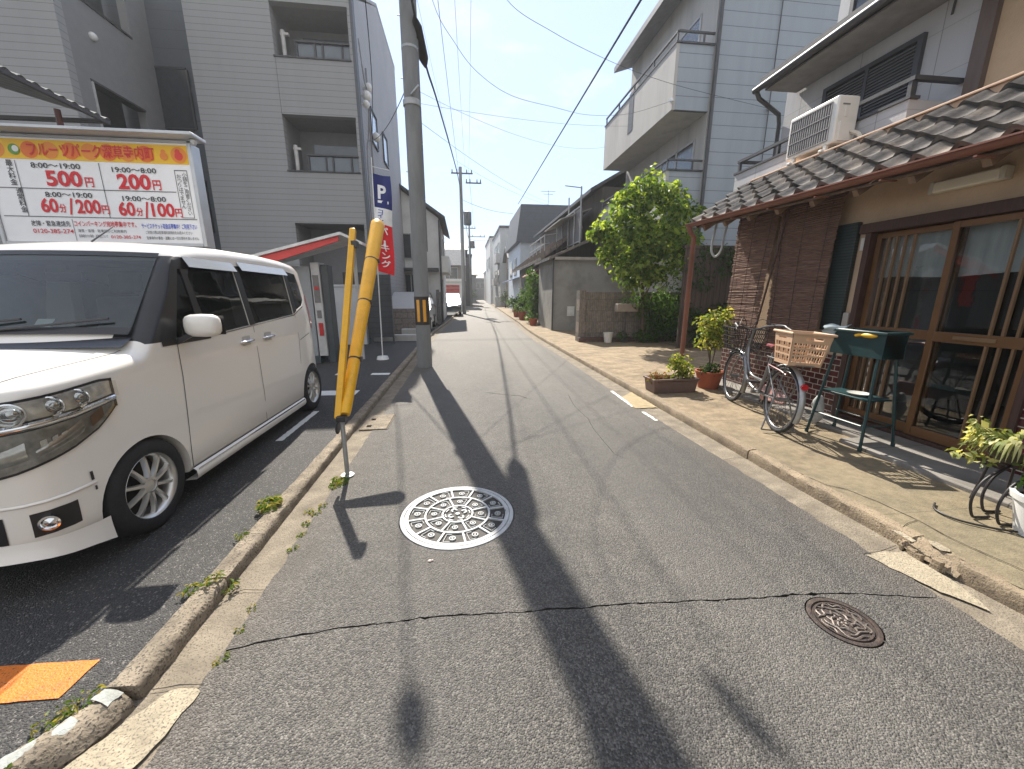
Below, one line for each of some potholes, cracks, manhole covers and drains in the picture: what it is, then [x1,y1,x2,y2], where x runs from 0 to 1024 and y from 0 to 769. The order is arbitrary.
manhole cover [400,487,514,551]
manhole cover [805,598,884,649]
crack [226,593,935,651]
